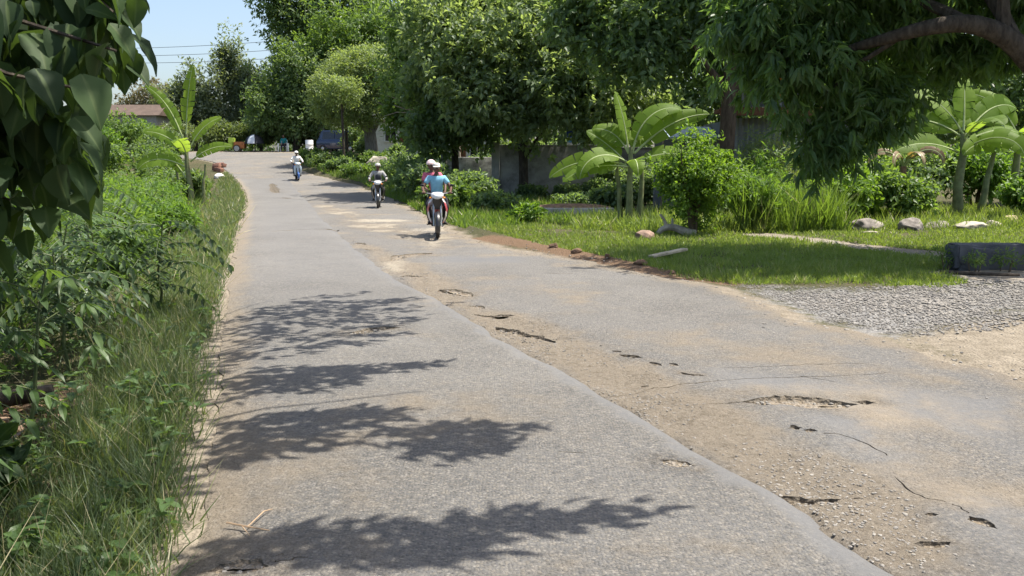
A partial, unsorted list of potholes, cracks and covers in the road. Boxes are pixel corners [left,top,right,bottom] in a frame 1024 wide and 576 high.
crack [824,433,887,456]
pothole [661,459,694,467]
pothole [207,558,268,574]
pothole [968,516,998,529]
pothole [782,496,841,506]
pothole [495,327,556,343]
pothole [743,395,858,409]
pothole [349,326,400,334]
crack [605,363,886,398]
crack [895,477,969,513]
pothole [438,289,473,297]
